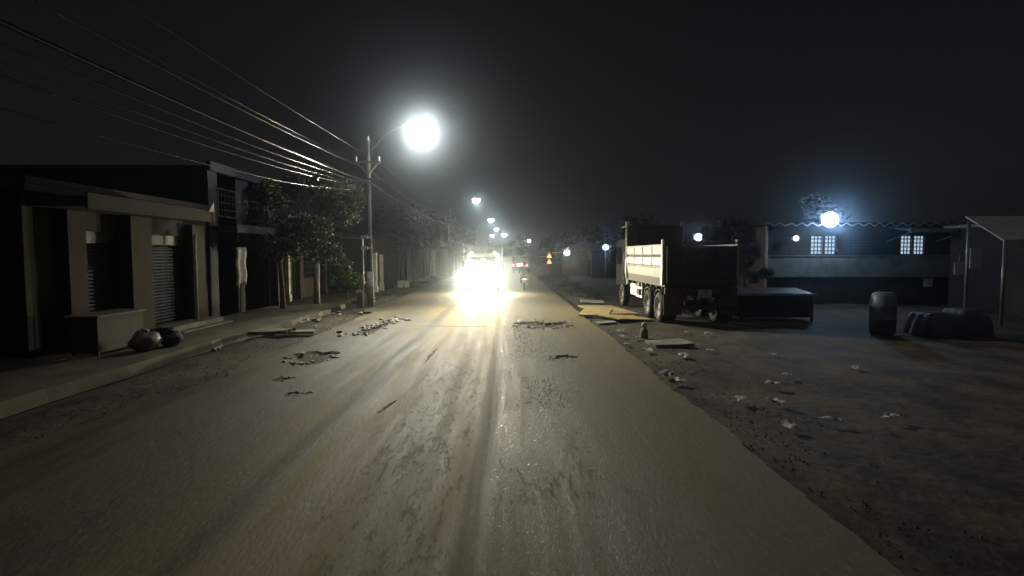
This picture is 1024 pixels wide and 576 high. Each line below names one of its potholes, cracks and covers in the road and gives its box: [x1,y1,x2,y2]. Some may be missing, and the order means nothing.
pothole [520,321,568,329]
pothole [286,351,341,366]
pothole [356,320,391,336]
